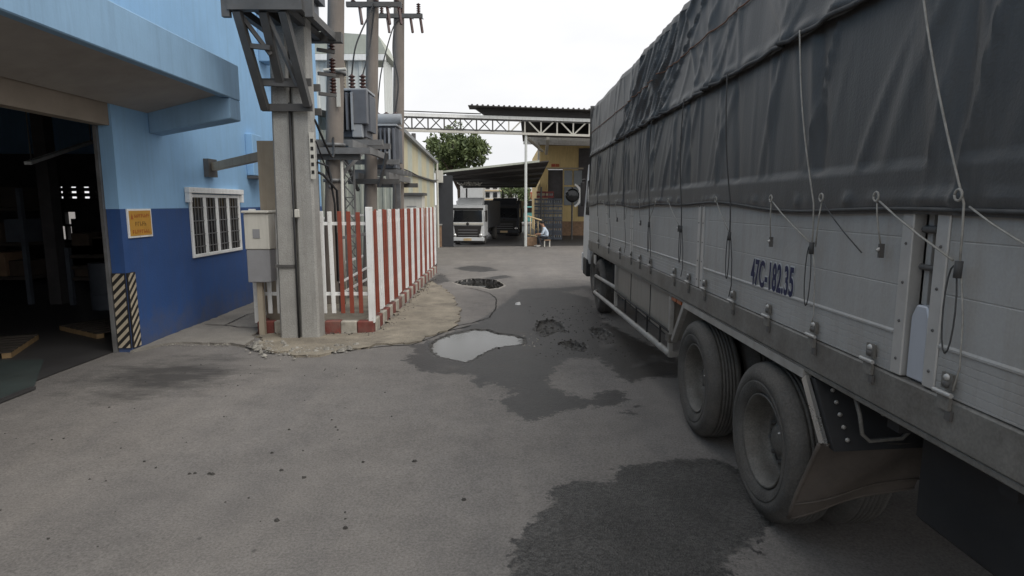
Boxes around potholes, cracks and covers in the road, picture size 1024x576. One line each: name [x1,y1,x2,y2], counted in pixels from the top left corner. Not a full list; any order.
pothole [452,278,506,290]
pothole [557,339,587,352]
pothole [534,316,569,337]
crack [349,288,497,351]
pothole [588,326,614,340]
pothole [428,329,526,363]
